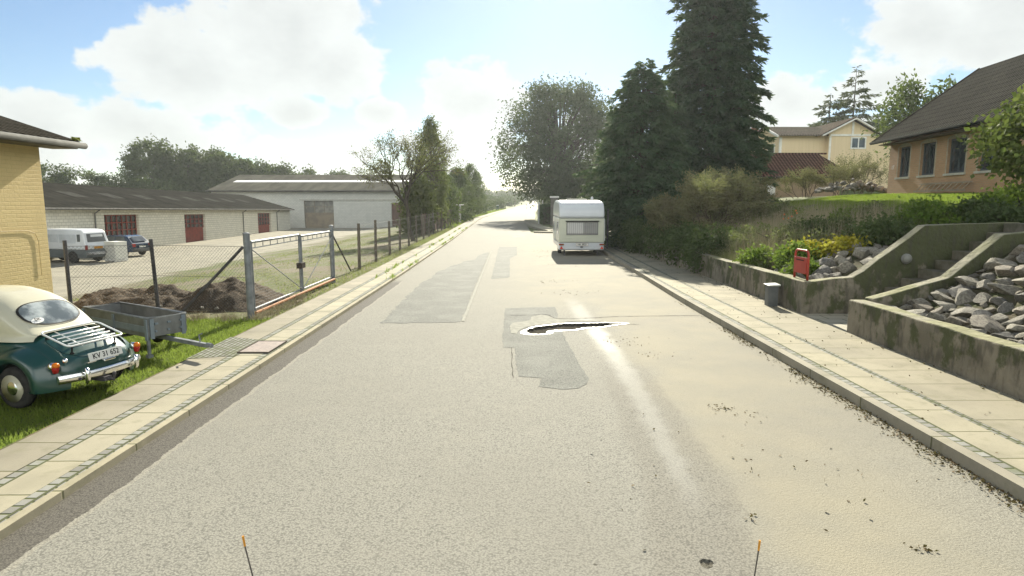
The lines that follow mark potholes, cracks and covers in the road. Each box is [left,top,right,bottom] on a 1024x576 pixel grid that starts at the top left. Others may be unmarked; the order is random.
manhole cover [237,341,287,353]
pothole [527,323,621,334]
